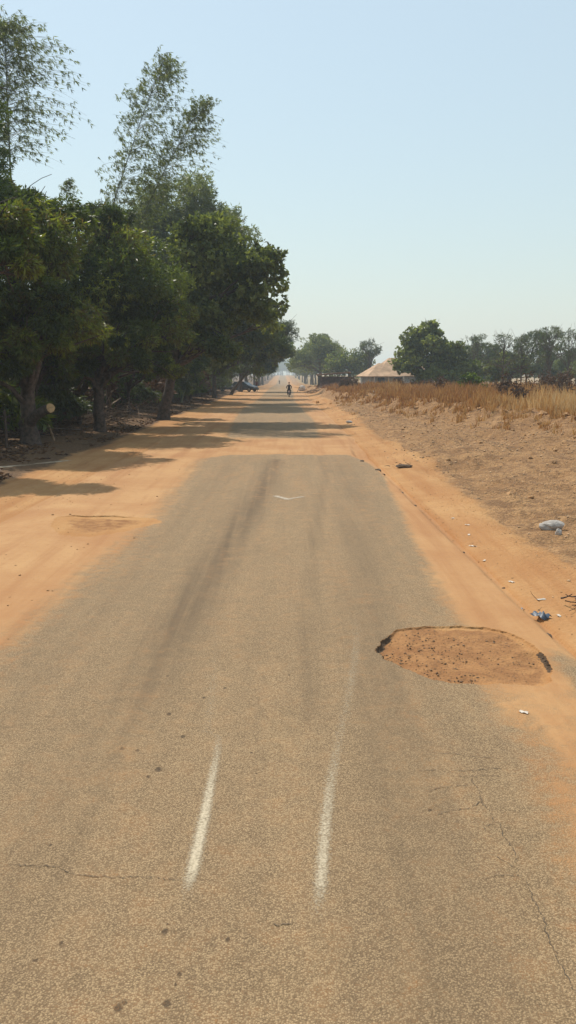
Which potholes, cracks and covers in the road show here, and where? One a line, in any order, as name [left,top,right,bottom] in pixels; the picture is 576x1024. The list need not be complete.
crack [16,864,180,880]
pothole [374,625,553,686]
crack [412,752,576,994]
